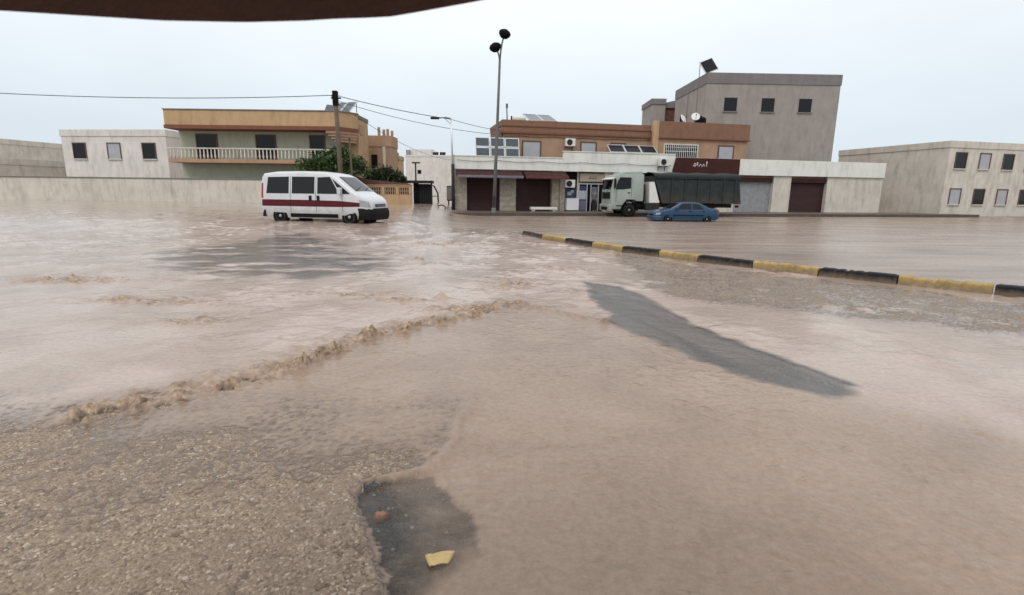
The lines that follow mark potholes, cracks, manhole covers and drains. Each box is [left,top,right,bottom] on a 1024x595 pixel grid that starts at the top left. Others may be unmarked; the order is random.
pothole [356,480,476,595]
